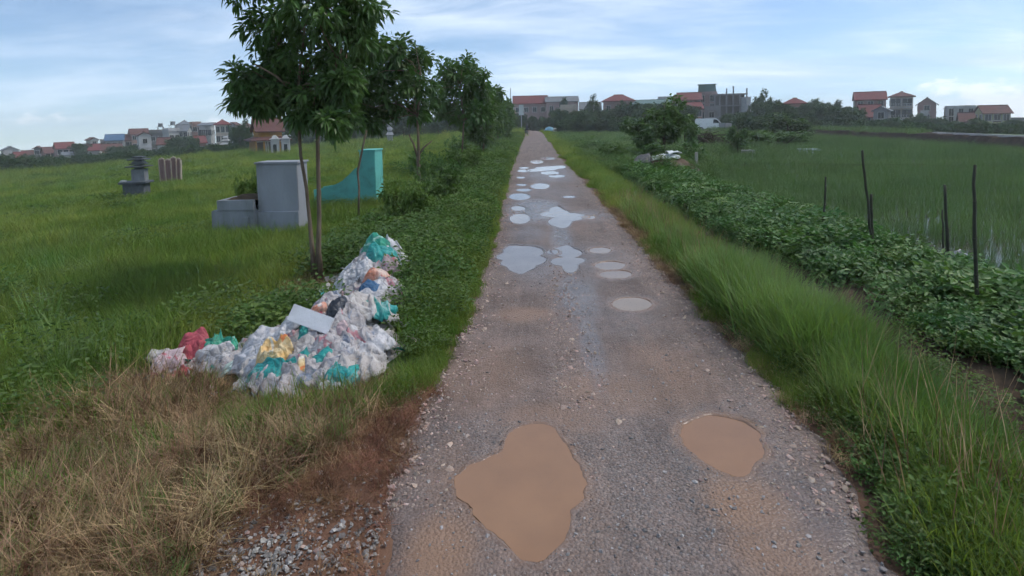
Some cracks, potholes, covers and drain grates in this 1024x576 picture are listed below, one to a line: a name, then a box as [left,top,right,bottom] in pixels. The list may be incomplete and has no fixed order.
pothole [447,419,594,570]
pothole [506,193,532,201]
pothole [597,269,635,280]
pothole [491,244,549,275]
pothole [587,246,613,254]
pothole [538,205,591,229]
pothole [609,296,655,312]
pothole [508,213,532,224]
pothole [549,244,588,274]
pothole [592,260,628,271]
pothole [674,411,772,481]
